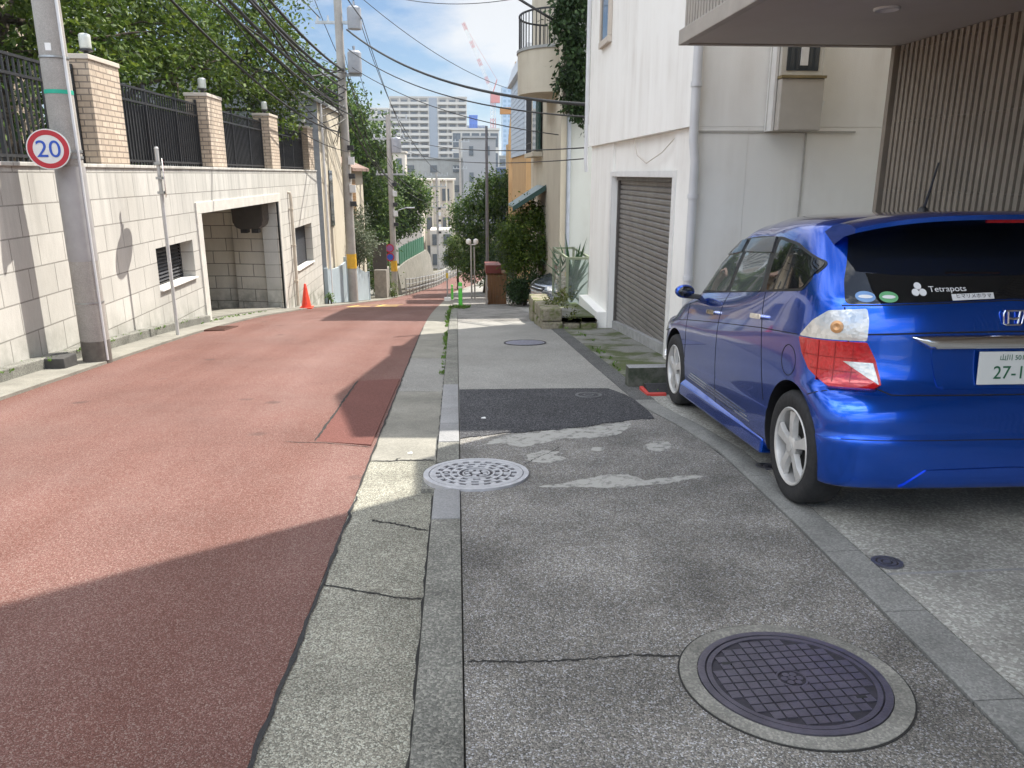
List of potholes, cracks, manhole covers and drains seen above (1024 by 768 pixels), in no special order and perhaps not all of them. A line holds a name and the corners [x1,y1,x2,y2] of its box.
manhole cover [678,624,918,753]
crack [467,653,680,663]
